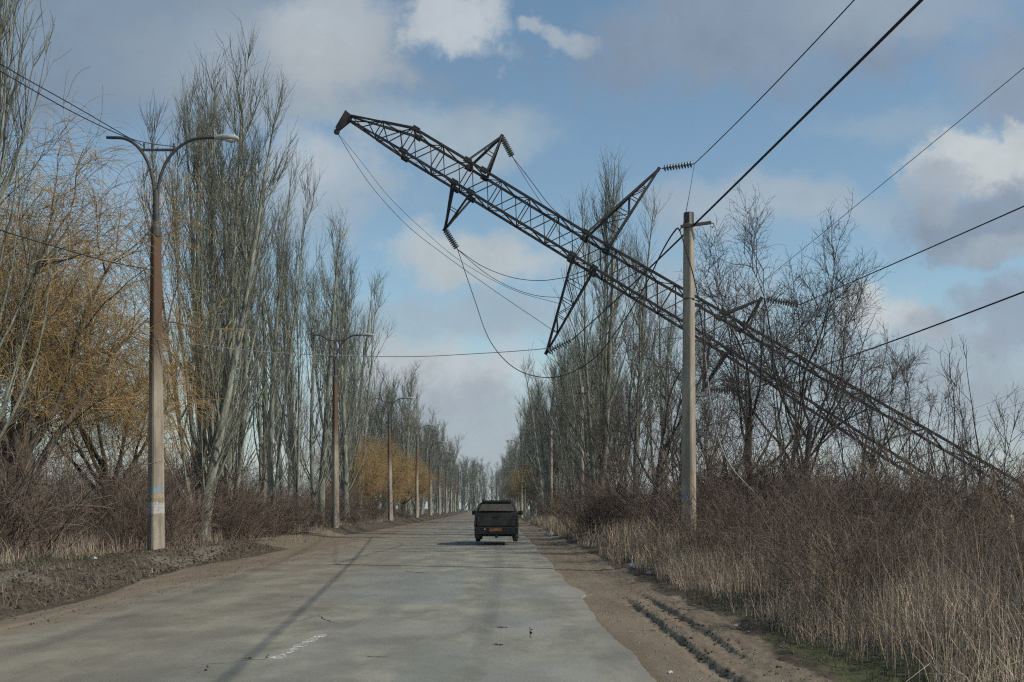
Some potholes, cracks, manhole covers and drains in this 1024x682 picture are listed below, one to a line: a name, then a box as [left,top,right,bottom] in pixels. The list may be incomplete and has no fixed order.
crack [180,654,269,674]
crack [286,612,338,623]
